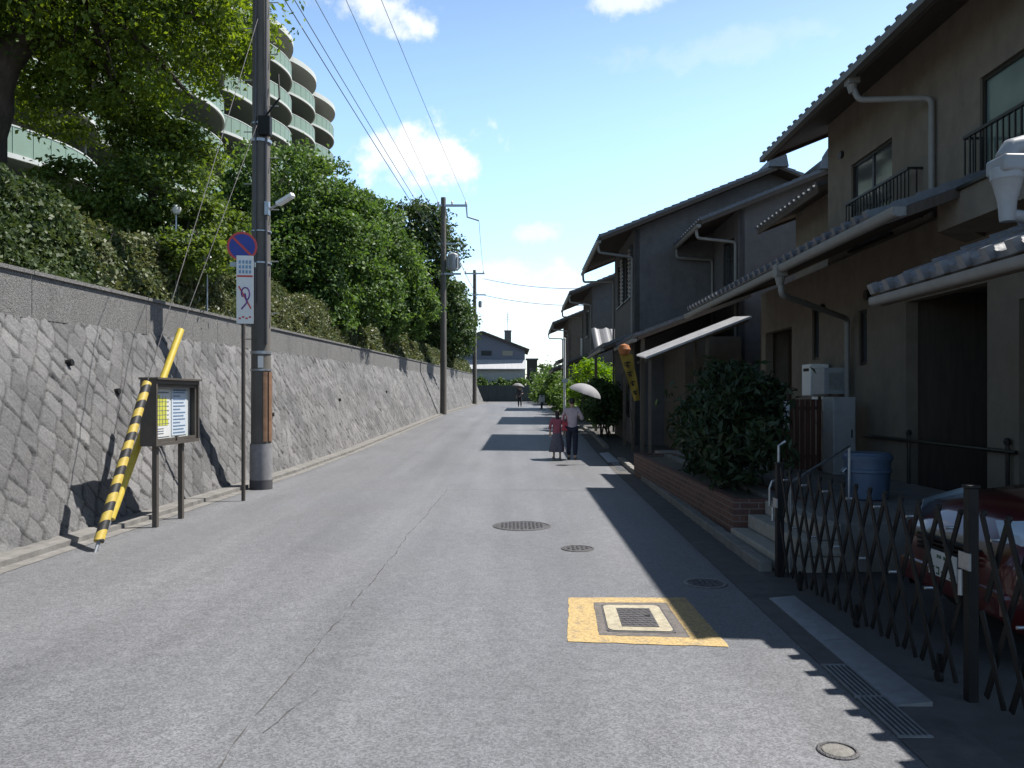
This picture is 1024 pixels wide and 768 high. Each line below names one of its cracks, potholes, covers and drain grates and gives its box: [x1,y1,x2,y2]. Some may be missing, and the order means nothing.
manhole cover [683,578,728,589]
utility cover [816,741,860,761]
manhole cover [493,521,551,531]
drain grate [820,664,934,739]
